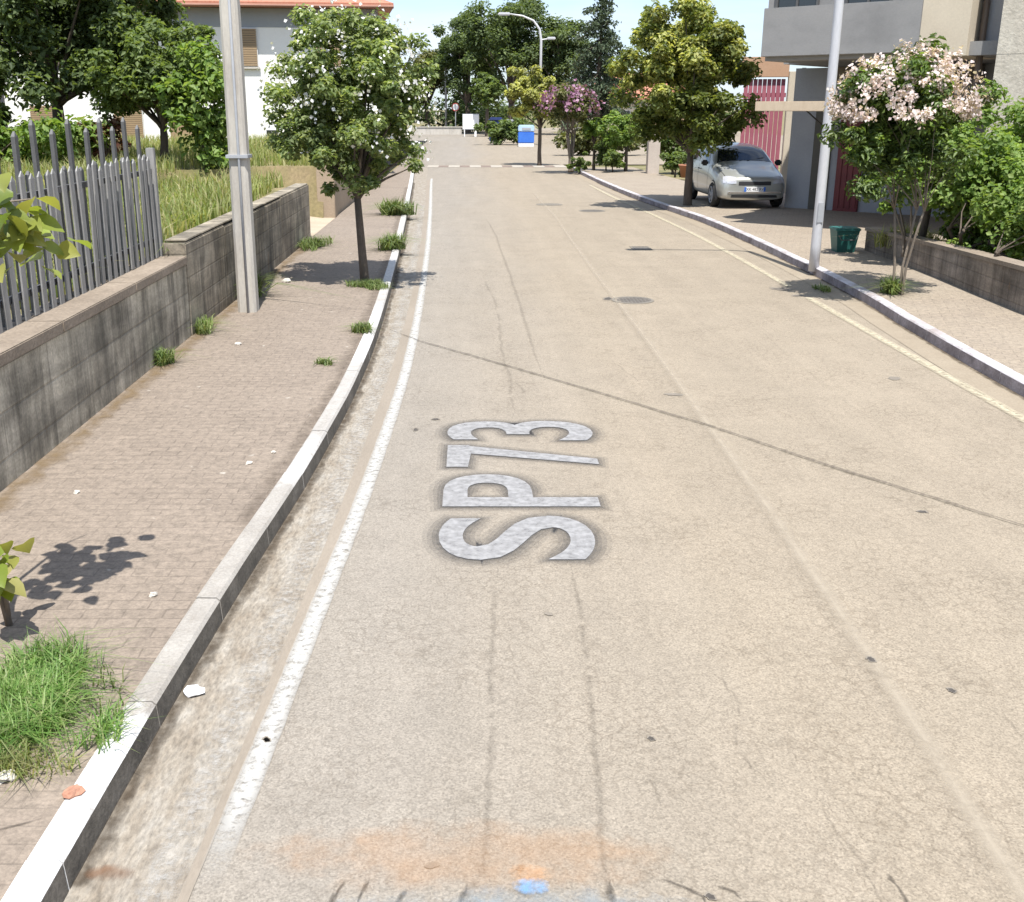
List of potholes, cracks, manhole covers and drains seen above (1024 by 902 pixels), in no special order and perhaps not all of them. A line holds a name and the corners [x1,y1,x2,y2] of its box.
manhole cover [611,296,654,304]
